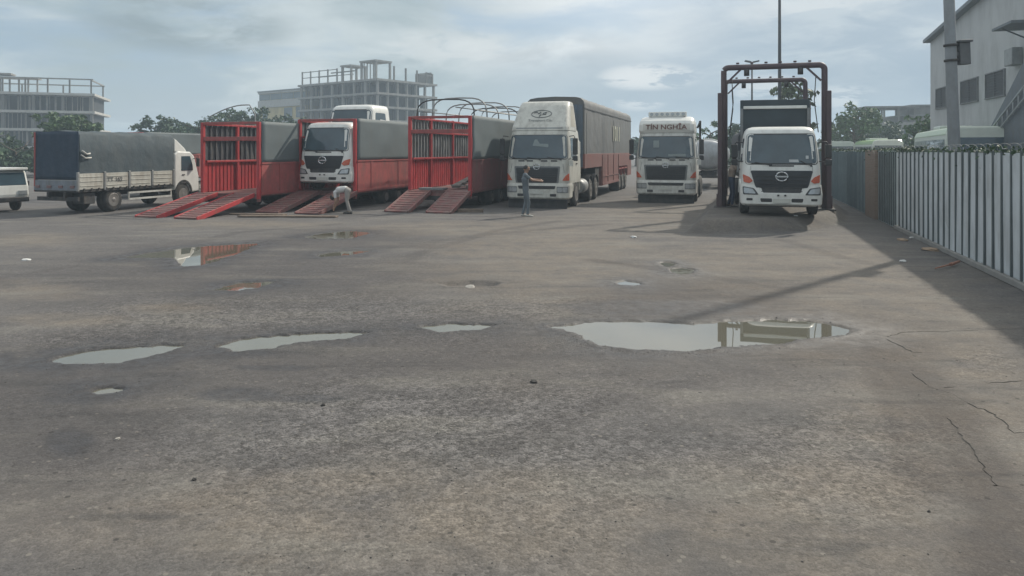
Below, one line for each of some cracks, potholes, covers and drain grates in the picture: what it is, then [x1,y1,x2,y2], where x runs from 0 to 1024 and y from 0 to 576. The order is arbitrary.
pothole [533,315,877,356]
pothole [427,278,511,291]
pothole [392,320,511,335]
pothole [302,249,389,258]
pothole [22,339,210,370]
pothole [197,328,386,356]
pothole [292,230,383,240]
pothole [658,265,706,276]
crack [876,328,1024,489]
pothole [602,278,653,288]
